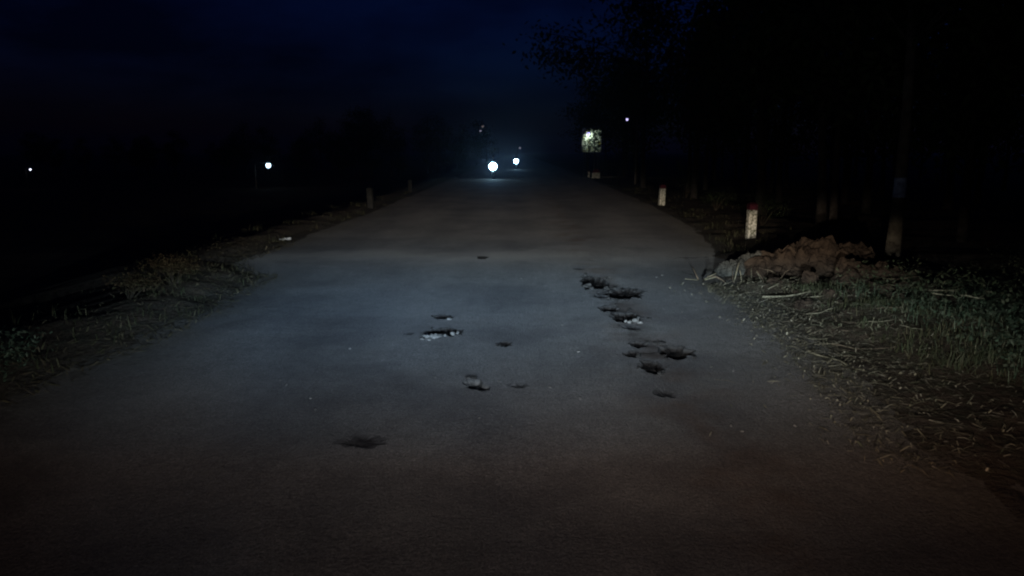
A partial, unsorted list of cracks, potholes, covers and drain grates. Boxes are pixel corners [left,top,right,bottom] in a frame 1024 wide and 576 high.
pothole [462,379,491,391]
pothole [655,345,696,360]
pothole [652,388,679,398]
pothole [425,327,464,337]
pothole [609,312,644,323]
pothole [596,287,647,299]
pothole [333,433,388,449]
pothole [579,276,610,290]
pothole [637,360,666,375]
